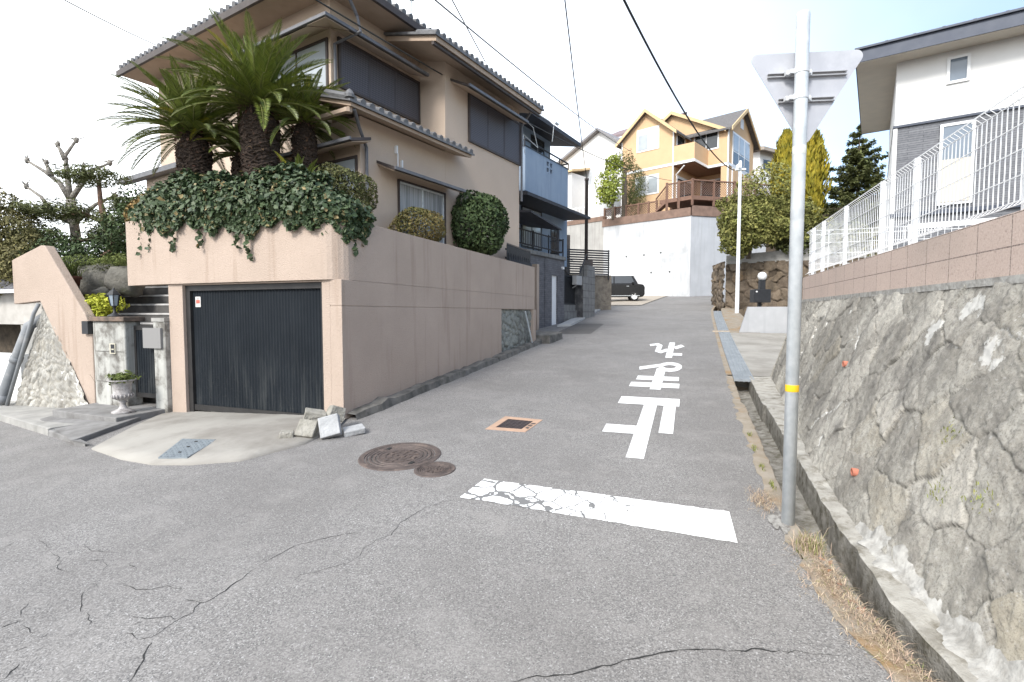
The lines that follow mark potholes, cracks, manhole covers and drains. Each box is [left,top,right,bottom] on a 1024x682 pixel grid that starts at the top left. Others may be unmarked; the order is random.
drain grate [718,331,754,382]
drain grate [714,311,729,331]
manhole cover [414,461,456,478]
manhole cover [358,442,441,471]
crack [1,540,137,679]
crack [124,532,362,682]
crack [514,648,841,682]
